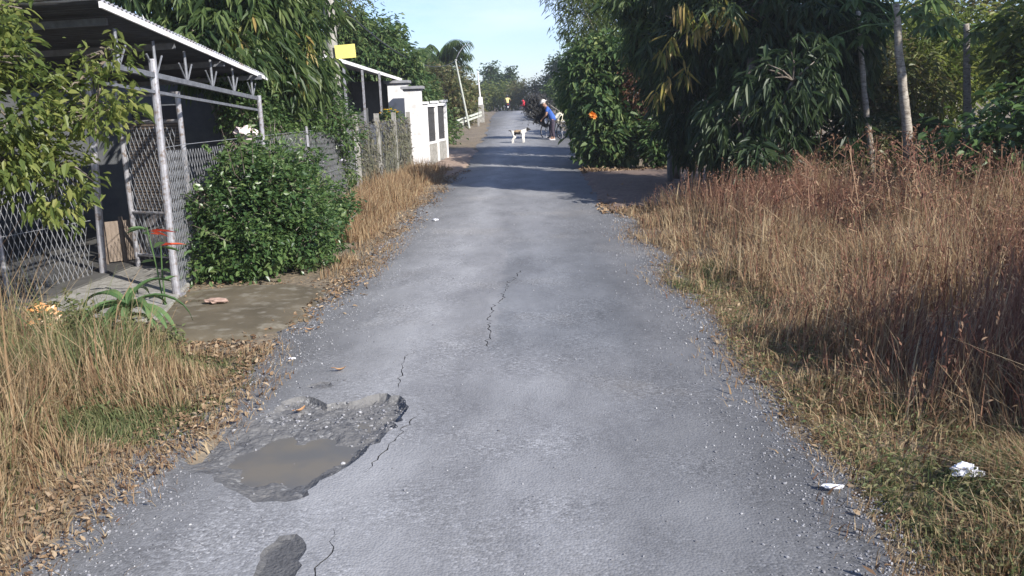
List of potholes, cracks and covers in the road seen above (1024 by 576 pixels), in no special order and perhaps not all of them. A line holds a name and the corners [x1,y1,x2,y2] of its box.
pothole [178,393,409,503]
crack [484,270,522,348]
crack [314,532,335,576]
pothole [253,534,307,576]
crack [366,417,415,472]
